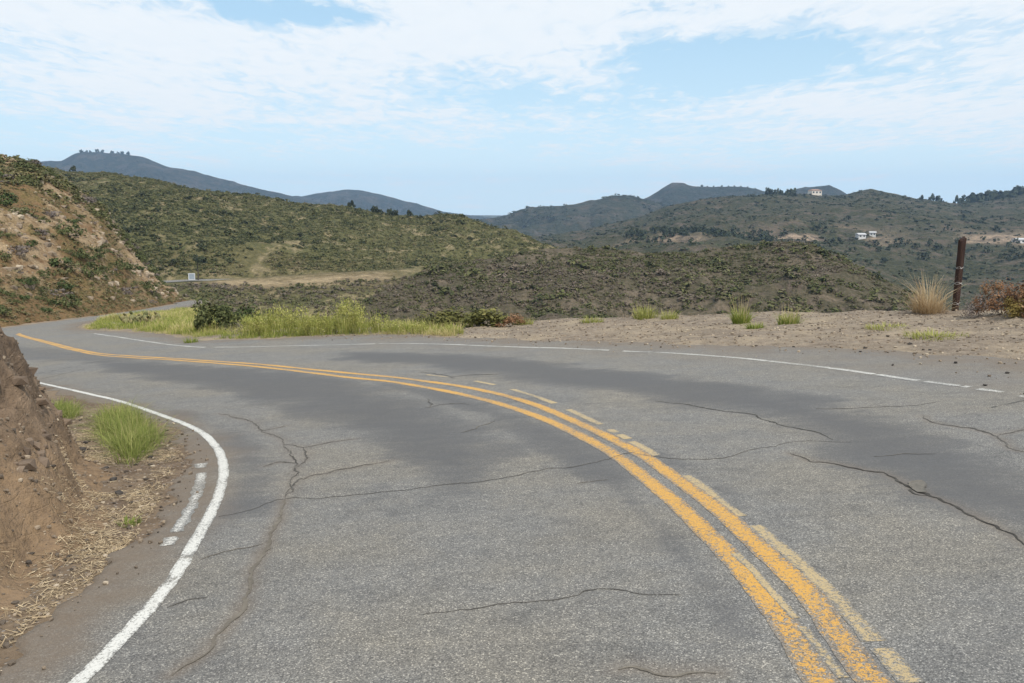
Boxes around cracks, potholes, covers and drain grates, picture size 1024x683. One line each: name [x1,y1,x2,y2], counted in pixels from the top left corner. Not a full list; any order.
crack [169,401,1024,675]
